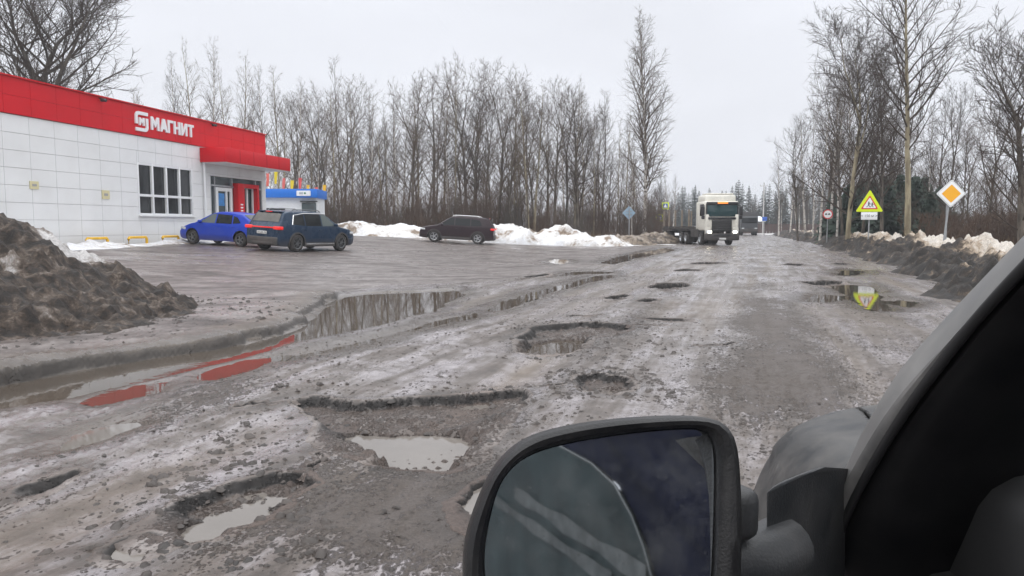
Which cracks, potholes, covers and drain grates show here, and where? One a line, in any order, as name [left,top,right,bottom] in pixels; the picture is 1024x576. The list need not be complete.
pothole [287,387,534,474]
pothole [570,371,641,395]
pothole [511,321,636,357]
pothole [114,469,326,556]
pothole [600,294,634,303]
pothole [792,280,847,288]
pothole [642,282,695,292]
pothole [0,466,93,519]
pothole [506,273,553,281]
